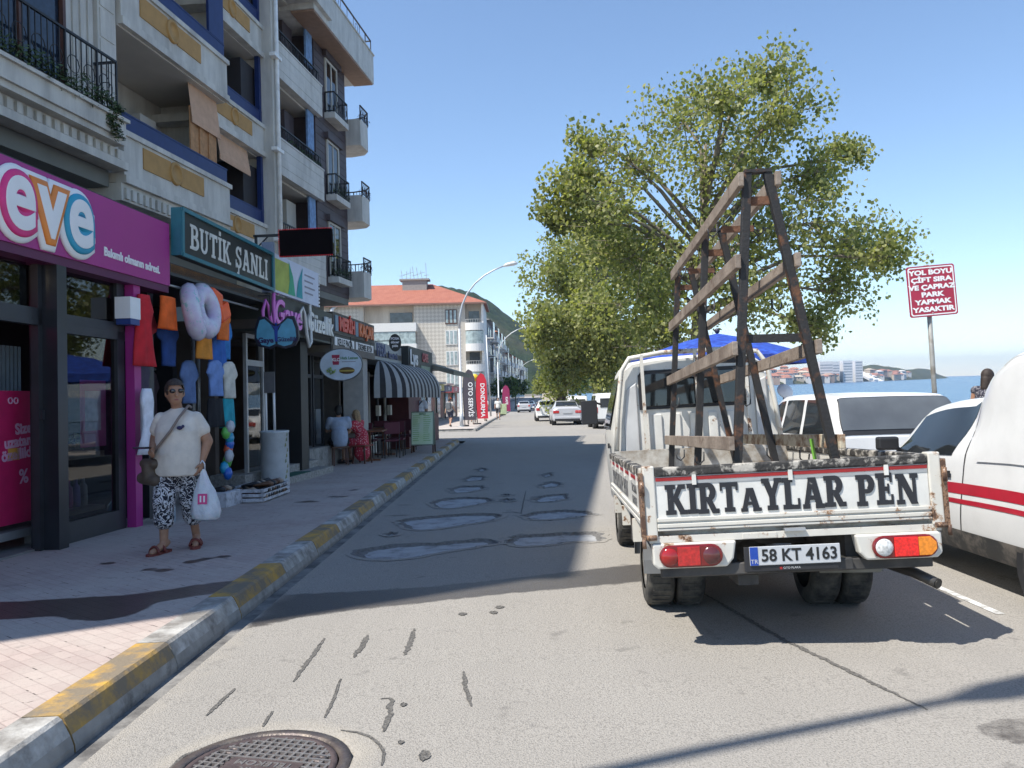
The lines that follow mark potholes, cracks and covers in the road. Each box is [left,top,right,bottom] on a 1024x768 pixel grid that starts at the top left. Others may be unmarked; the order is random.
pothole [498,530,612,547]
pothole [345,537,506,561]
crack [292,638,395,765]
crack [462,671,472,706]
pothole [526,493,574,502]
pothole [516,509,602,521]
manhole cover [171,730,351,768]
pothole [425,496,497,509]
crack [403,628,416,655]
pothole [390,512,508,531]
pothole [445,485,489,493]
